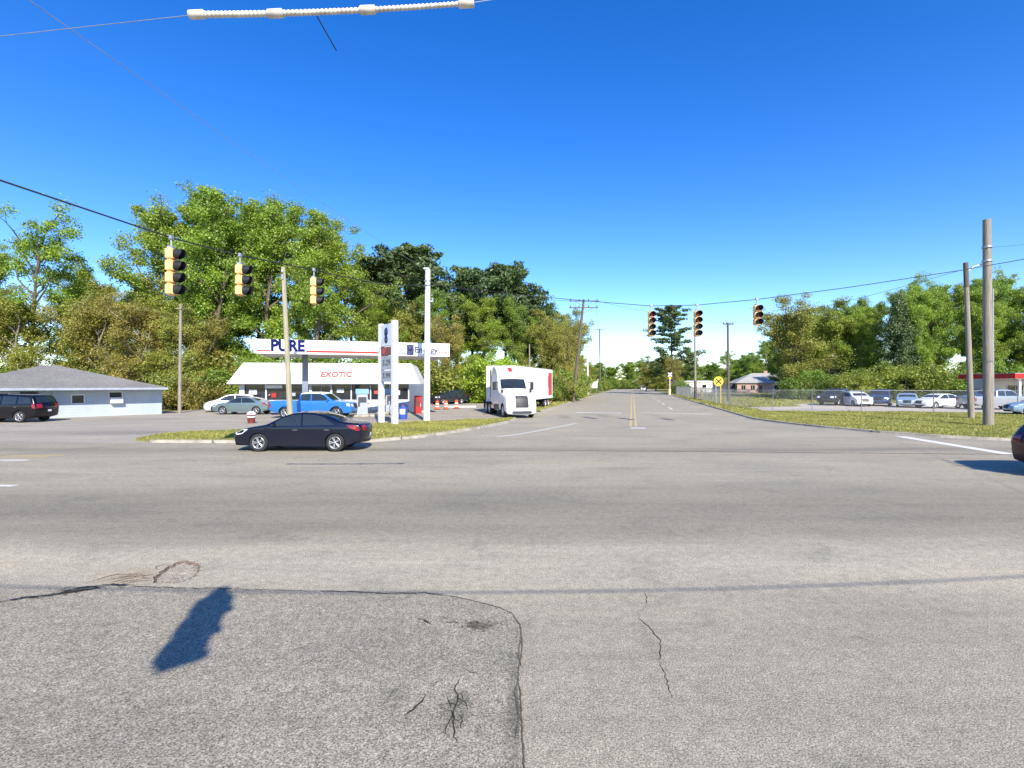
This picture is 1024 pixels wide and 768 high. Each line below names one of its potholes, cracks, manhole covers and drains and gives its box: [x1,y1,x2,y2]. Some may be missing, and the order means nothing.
crack [0,564,525,768]
crack [638,594,672,696]
